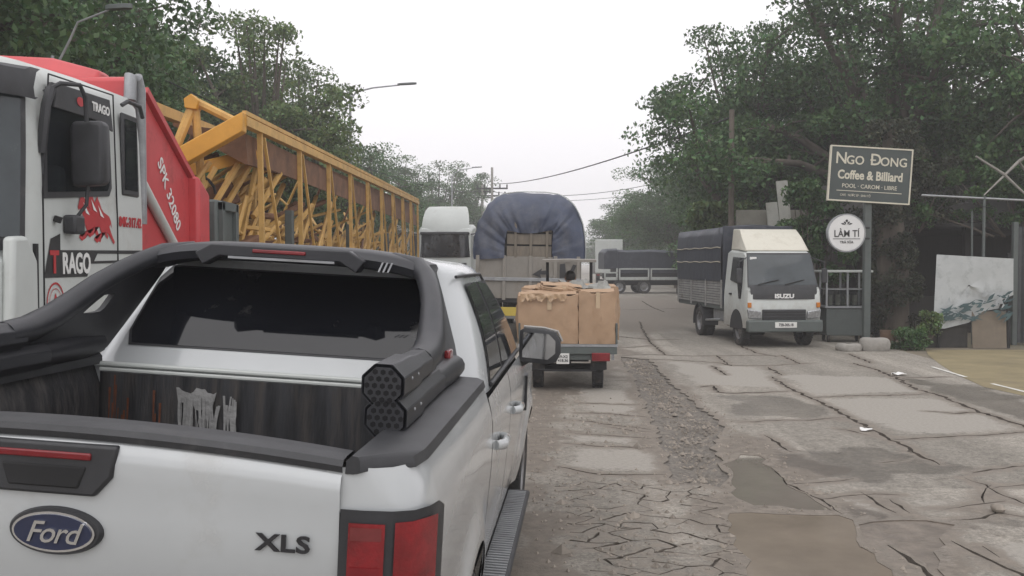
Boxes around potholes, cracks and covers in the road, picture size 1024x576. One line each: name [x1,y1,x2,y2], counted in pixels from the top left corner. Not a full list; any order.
pothole [621,357,729,487]
crack [623,301,804,394]
crack [888,545,933,576]
crack [810,377,987,415]
pothole [723,454,830,510]
crack [952,541,1024,576]
crack [555,466,747,576]
pothole [727,512,893,576]
crack [948,466,1024,520]
